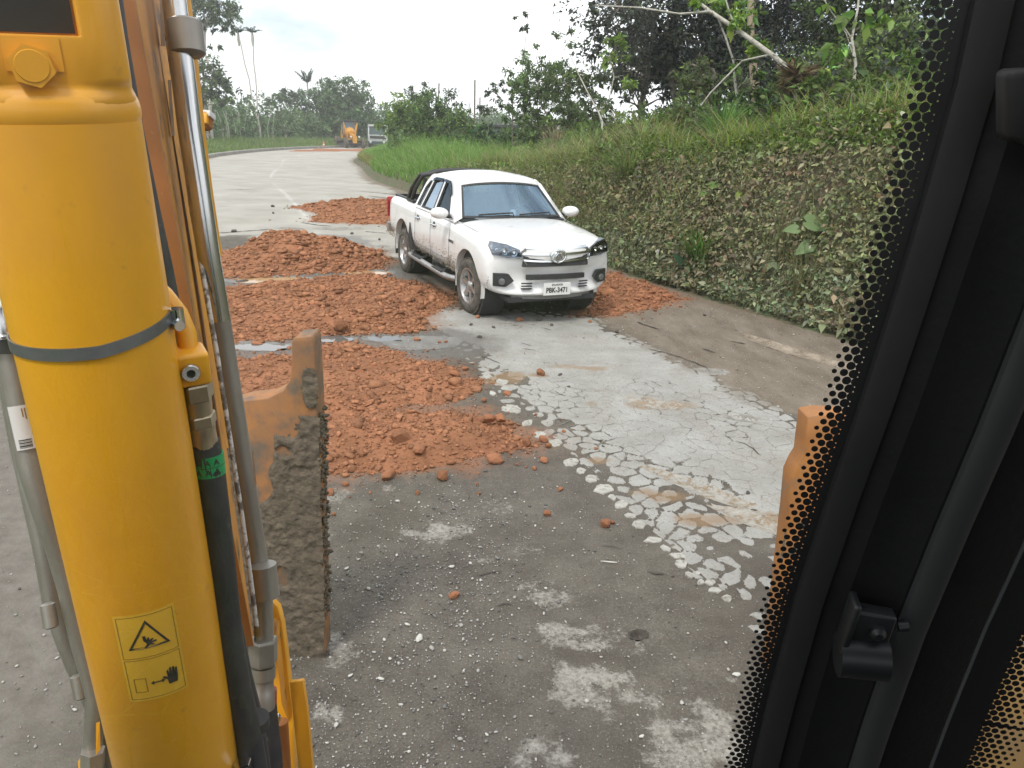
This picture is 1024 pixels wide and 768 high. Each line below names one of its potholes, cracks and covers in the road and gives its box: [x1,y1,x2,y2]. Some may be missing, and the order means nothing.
crack [518,379,794,506]
